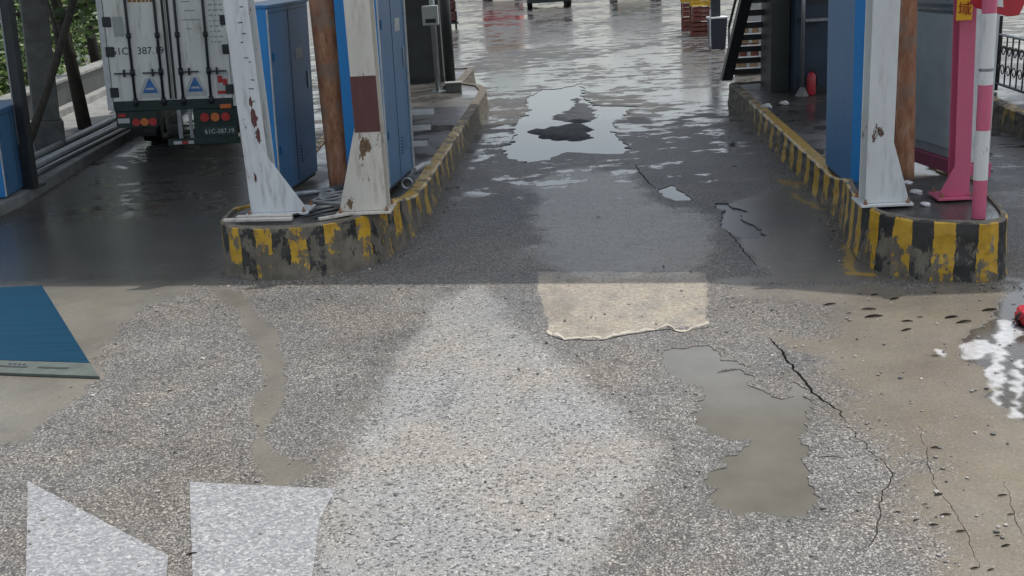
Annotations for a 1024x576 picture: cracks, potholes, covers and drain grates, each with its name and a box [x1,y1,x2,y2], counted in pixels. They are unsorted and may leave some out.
crack [920,433,980,568]
crack [769,337,893,566]
pothole [500,83,639,164]
pothole [658,185,692,201]
pothole [660,345,821,517]
